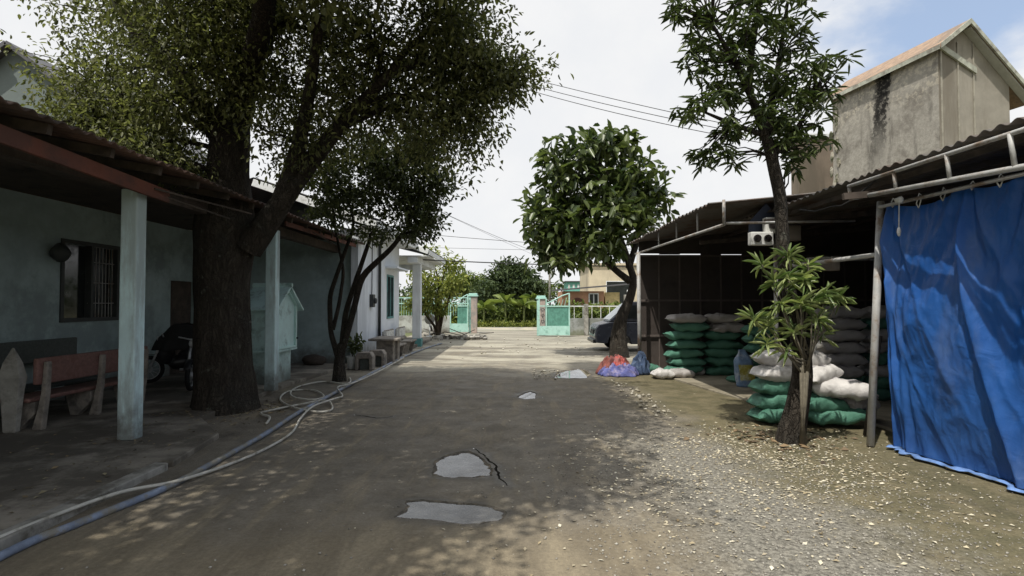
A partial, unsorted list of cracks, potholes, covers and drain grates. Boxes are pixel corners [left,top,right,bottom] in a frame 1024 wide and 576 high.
crack [474,448,508,486]
